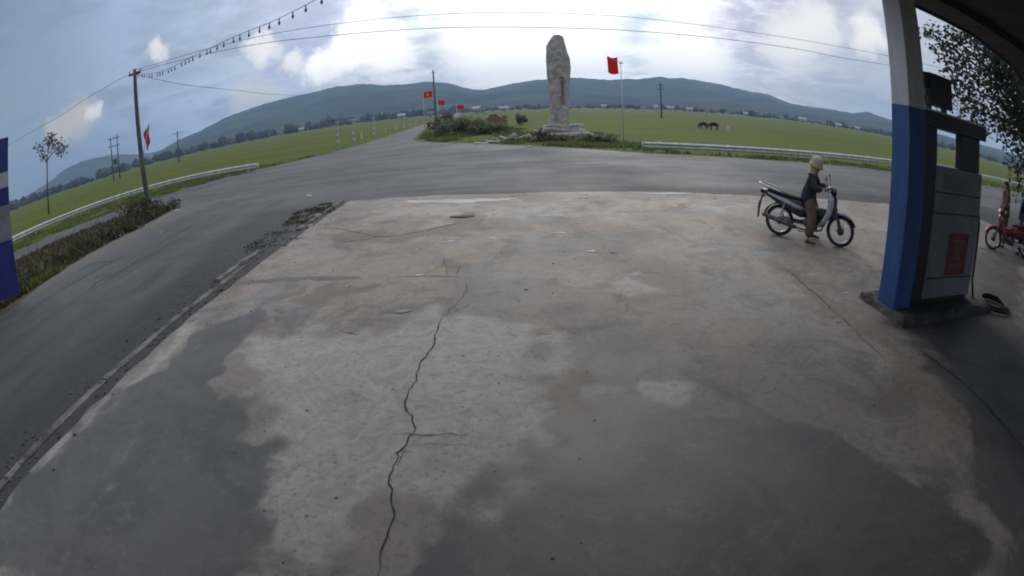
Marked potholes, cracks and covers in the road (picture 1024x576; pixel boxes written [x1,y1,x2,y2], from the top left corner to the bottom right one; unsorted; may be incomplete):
crack [377,286,471,575]
